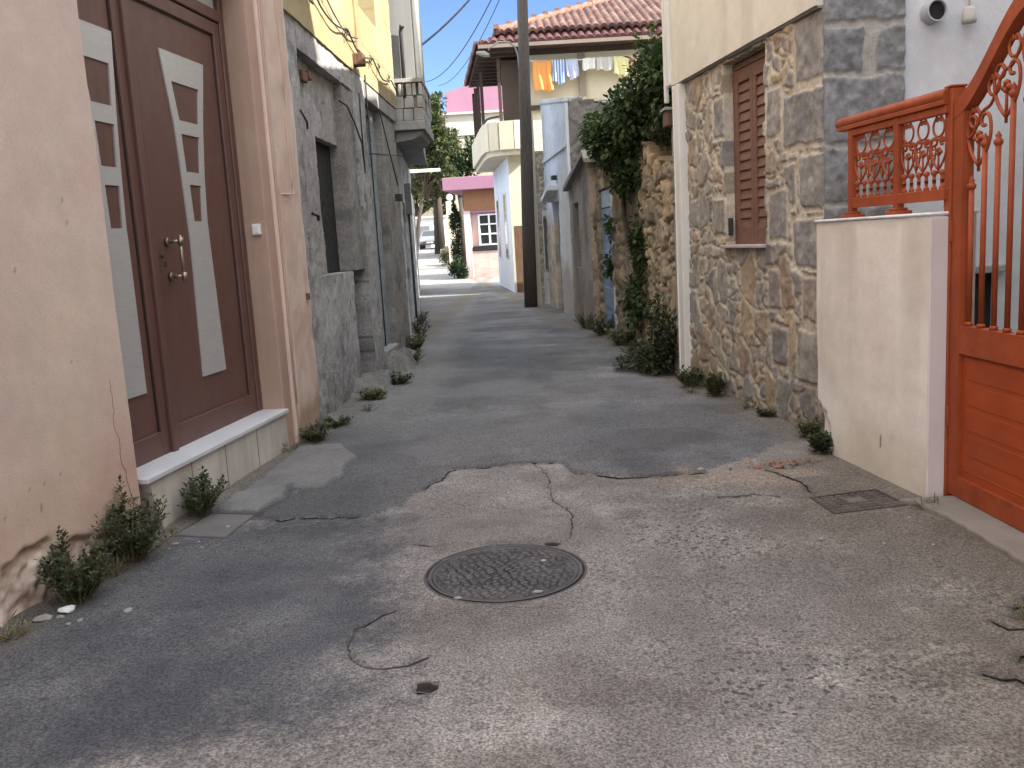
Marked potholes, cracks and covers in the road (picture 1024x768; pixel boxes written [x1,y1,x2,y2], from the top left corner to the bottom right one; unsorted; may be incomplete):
crack [426,463,576,538]
manhole cover [423,544,587,605]
pothole [412,680,439,695]
crack [982,607,1024,684]
crack [347,611,429,670]
crack [717,470,811,498]
